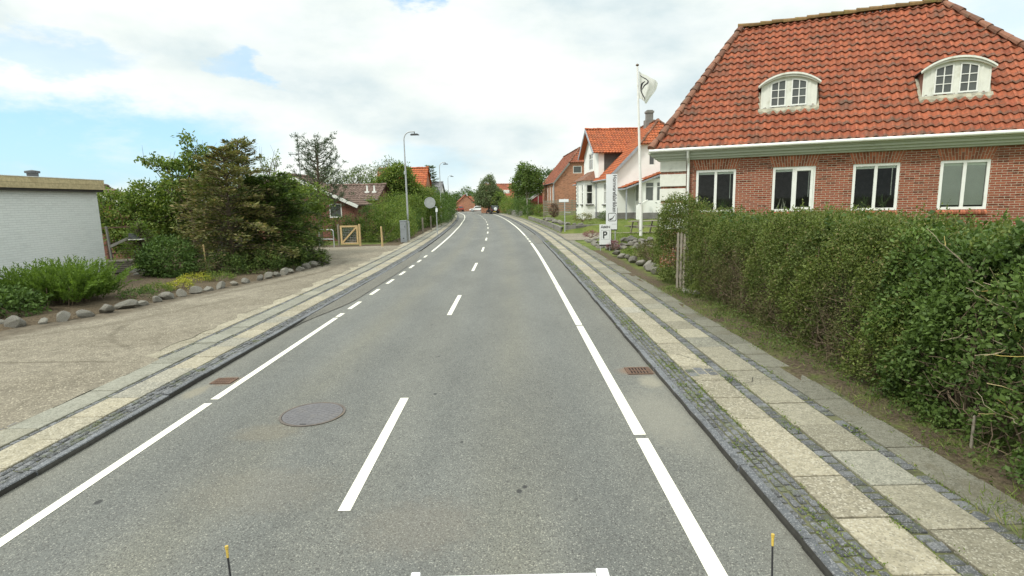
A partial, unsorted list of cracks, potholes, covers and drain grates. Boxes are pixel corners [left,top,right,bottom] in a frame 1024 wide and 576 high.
drain grate [624,367,654,375]
manhole cover [279,402,346,427]
